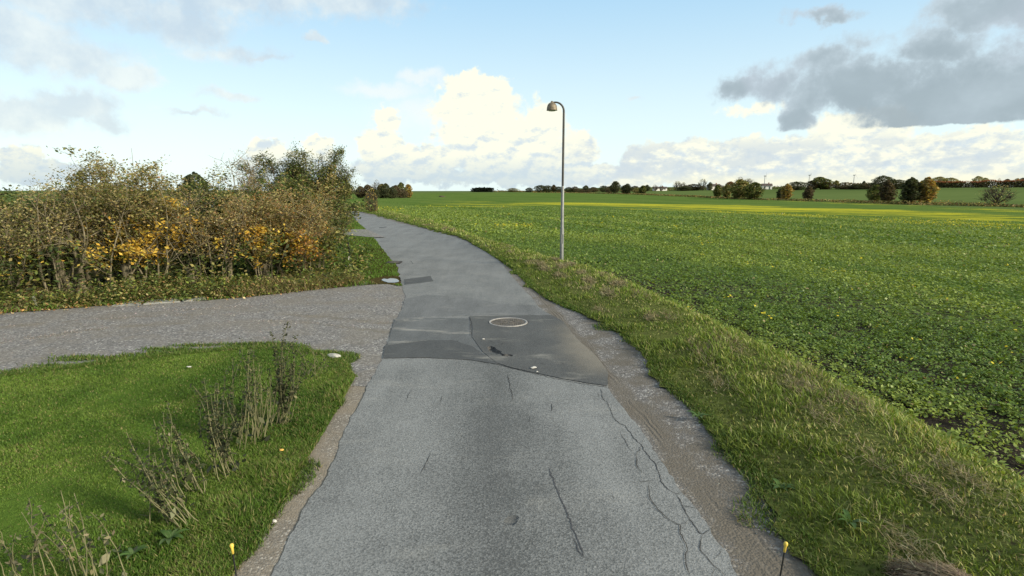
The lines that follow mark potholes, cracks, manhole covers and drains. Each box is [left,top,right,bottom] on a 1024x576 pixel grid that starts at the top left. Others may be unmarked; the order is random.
crack [598,391,725,576]
manhole cover [489,317,528,327]
